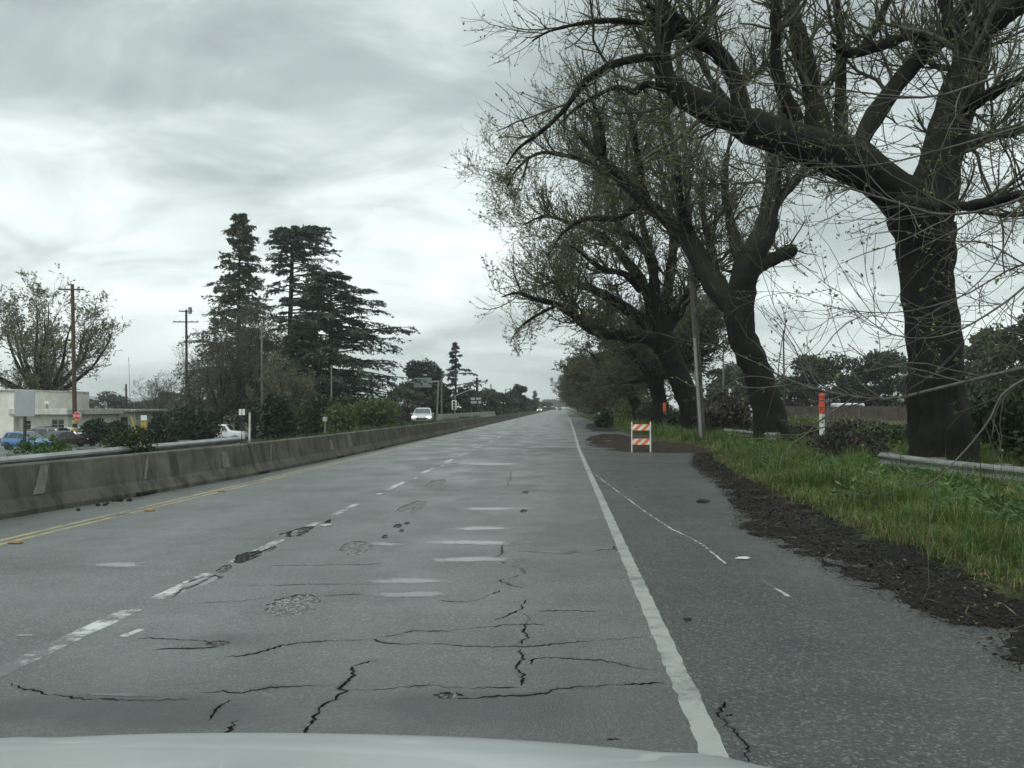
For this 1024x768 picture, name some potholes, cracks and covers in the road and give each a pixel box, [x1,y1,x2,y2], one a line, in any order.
crack [138,545,663,733]
crack [11,682,188,701]
pothole [233,550,260,563]
crack [716,701,750,763]
pothole [278,526,316,537]
